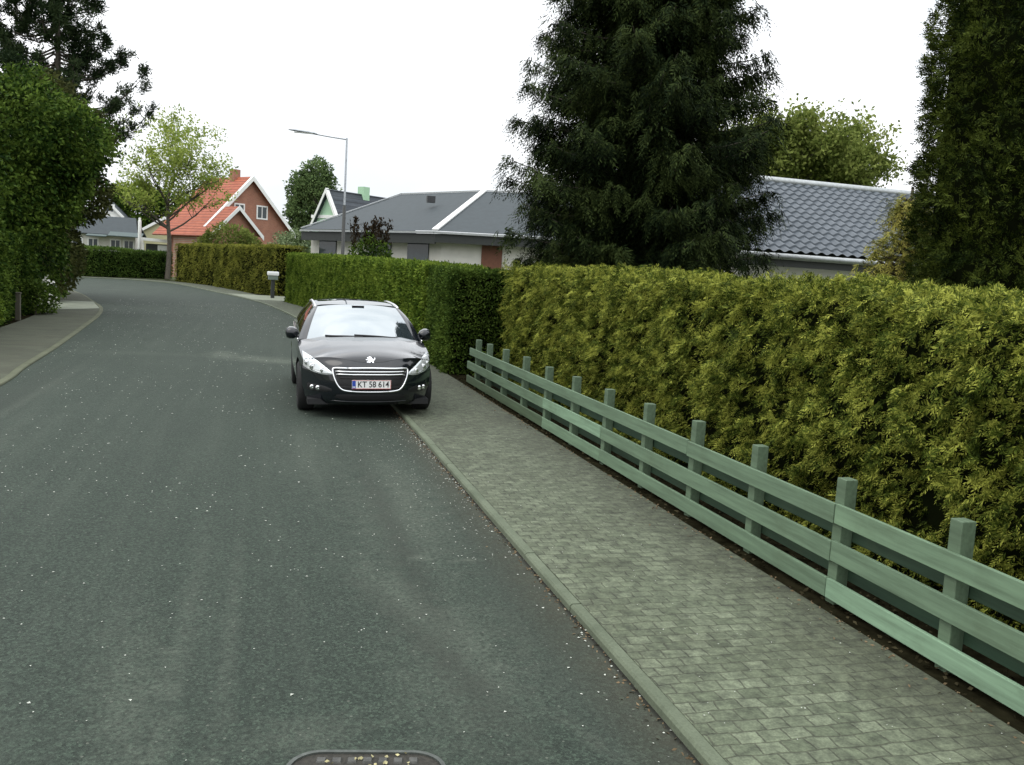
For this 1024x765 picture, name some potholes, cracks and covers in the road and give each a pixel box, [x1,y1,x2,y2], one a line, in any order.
manhole cover [287,750,446,765]
